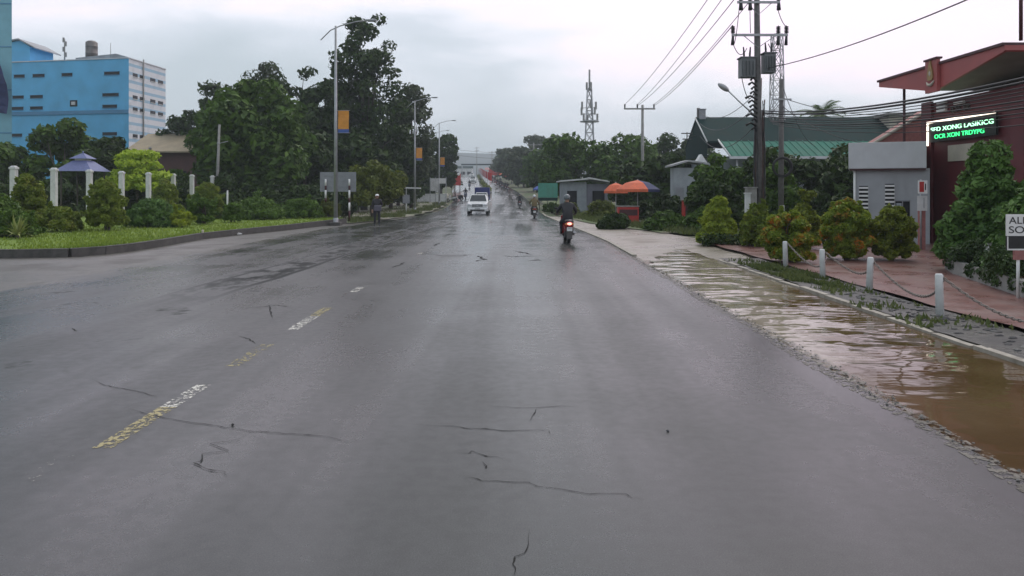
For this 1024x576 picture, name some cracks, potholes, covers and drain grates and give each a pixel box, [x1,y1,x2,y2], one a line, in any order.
crack [101,383,356,477]
crack [468,452,632,498]
